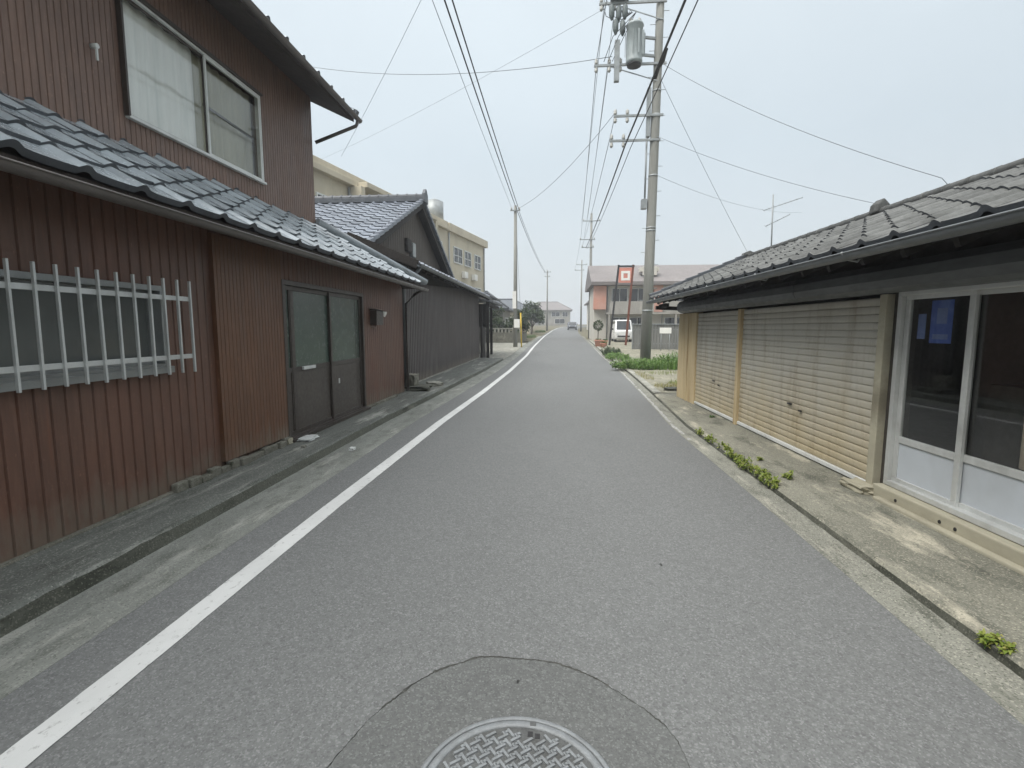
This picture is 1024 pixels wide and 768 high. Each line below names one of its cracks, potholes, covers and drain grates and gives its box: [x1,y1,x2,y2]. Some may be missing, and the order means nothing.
manhole cover [421,716,610,768]
